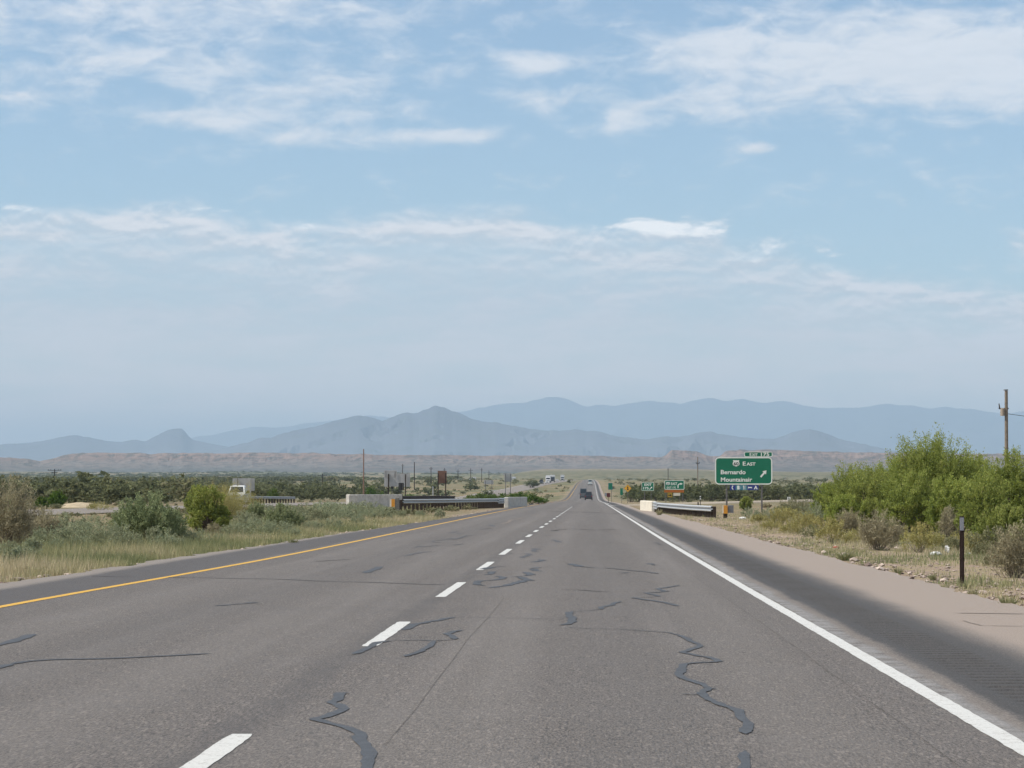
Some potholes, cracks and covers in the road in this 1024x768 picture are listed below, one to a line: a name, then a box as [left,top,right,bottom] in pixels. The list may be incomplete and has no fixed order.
crack [386,599,503,743]
